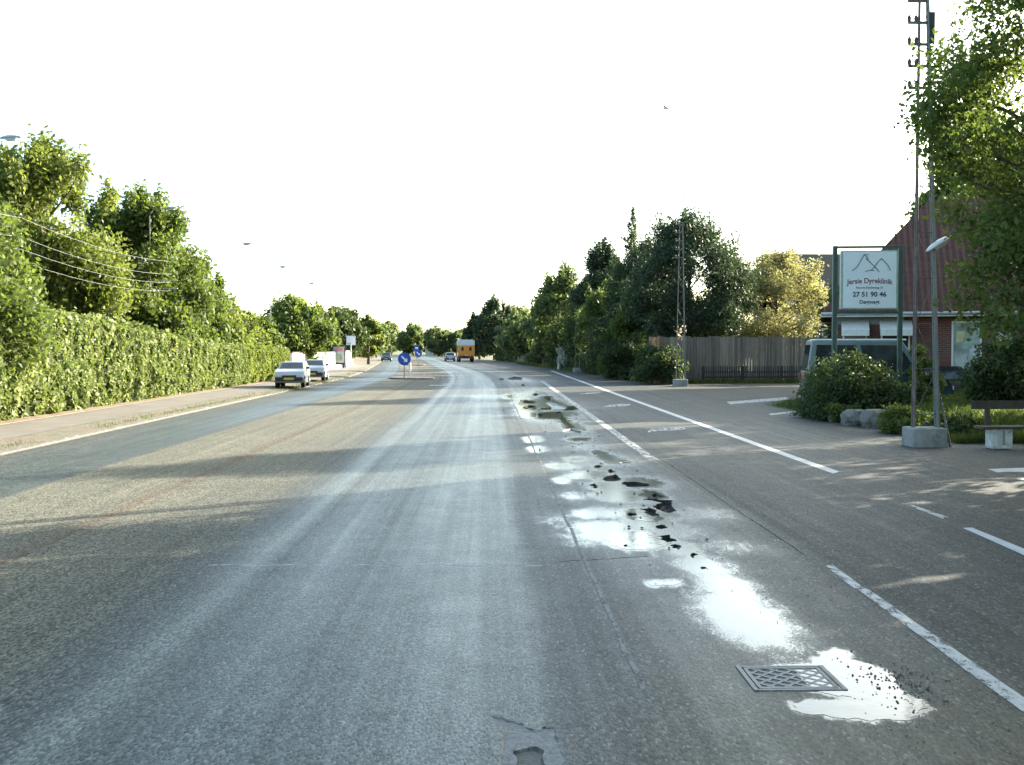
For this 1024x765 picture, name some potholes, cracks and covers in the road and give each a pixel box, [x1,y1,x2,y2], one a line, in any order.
pothole [540,402,567,410]
pothole [490,715,567,765]
pothole [643,498,676,513]
